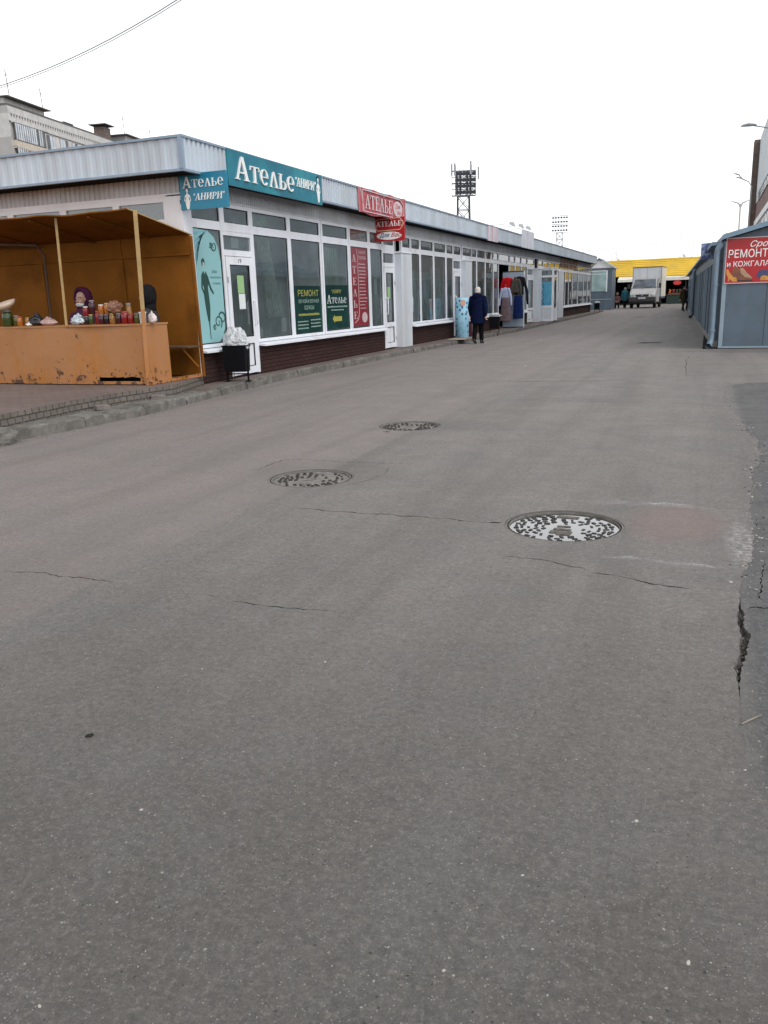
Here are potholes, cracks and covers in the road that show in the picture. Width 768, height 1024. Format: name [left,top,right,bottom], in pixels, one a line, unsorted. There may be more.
manhole cover [505,511,625,542]
manhole cover [268,469,354,488]
manhole cover [378,421,442,431]
crack [301,508,501,523]
crack [506,556,688,589]
